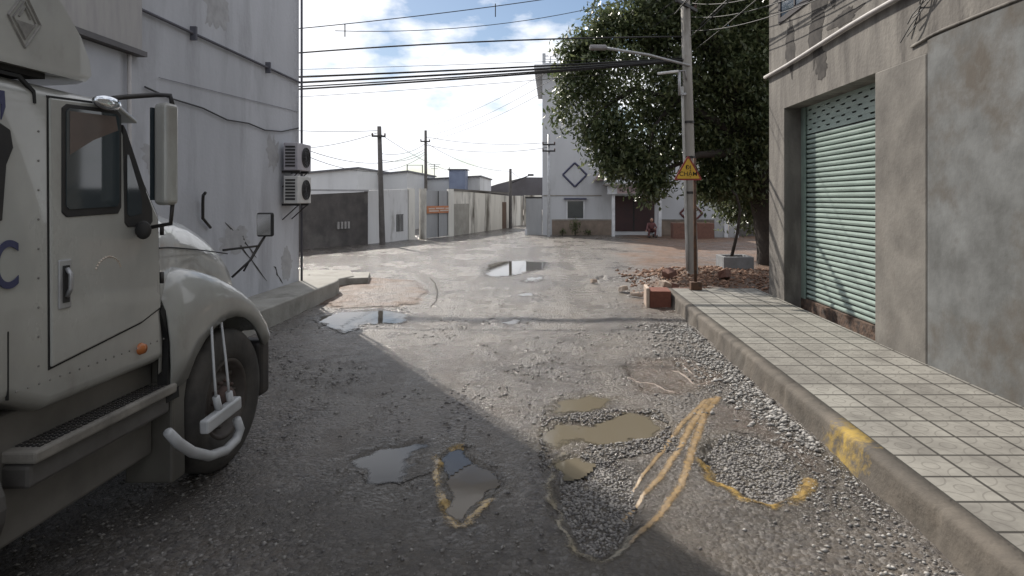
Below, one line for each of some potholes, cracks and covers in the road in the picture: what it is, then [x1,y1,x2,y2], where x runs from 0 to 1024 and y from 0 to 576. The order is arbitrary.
pothole [312,308,414,333]
pothole [481,260,549,277]
pothole [351,441,471,484]
pothole [547,395,626,424]
pothole [541,410,664,481]
pothole [543,452,647,563]
pothole [432,444,501,527]
